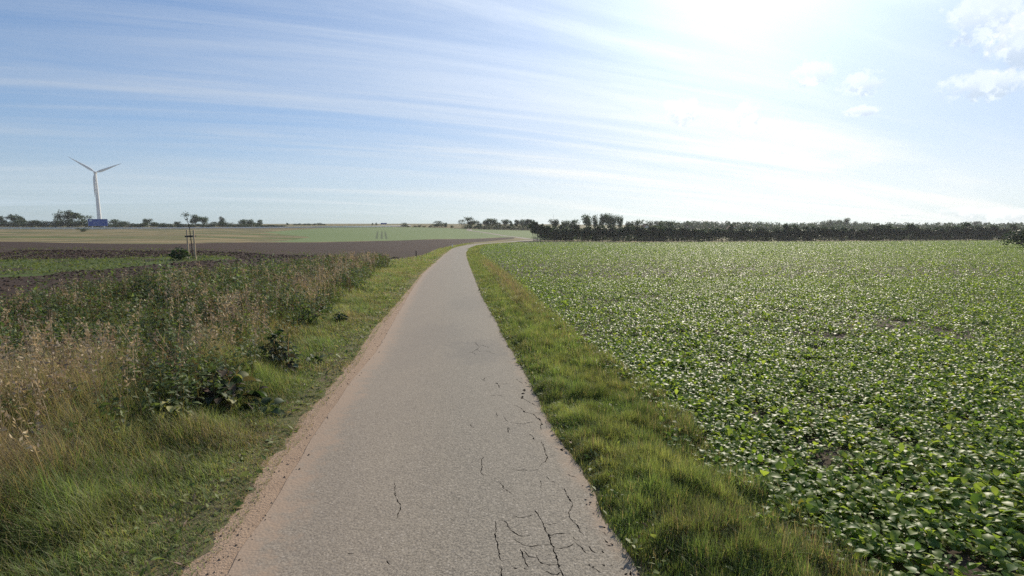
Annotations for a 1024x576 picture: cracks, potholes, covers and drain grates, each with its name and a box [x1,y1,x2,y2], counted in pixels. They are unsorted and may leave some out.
crack [480,378,632,576]
